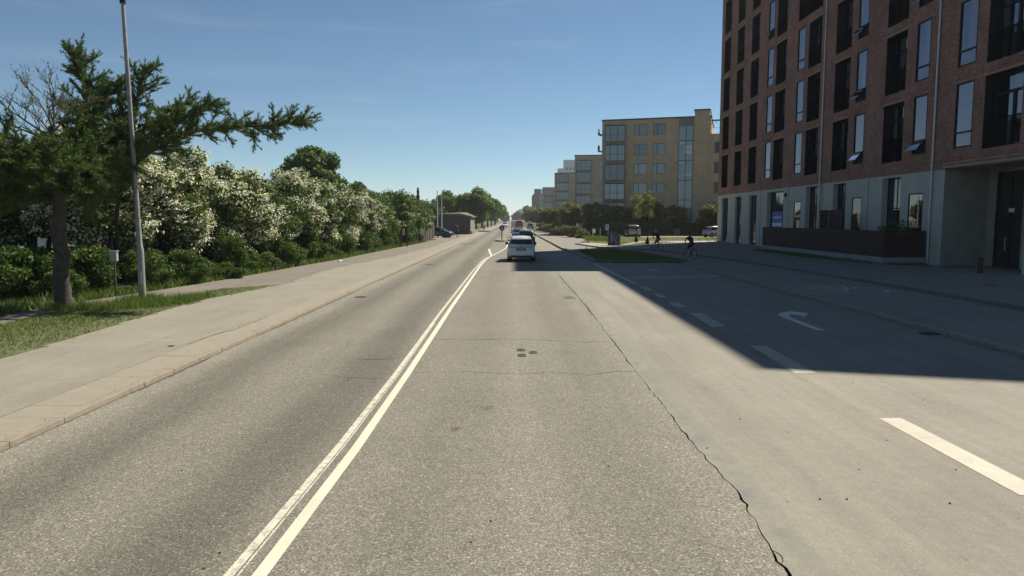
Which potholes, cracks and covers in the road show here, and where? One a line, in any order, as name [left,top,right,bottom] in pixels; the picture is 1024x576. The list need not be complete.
crack [416,264,792,576]
